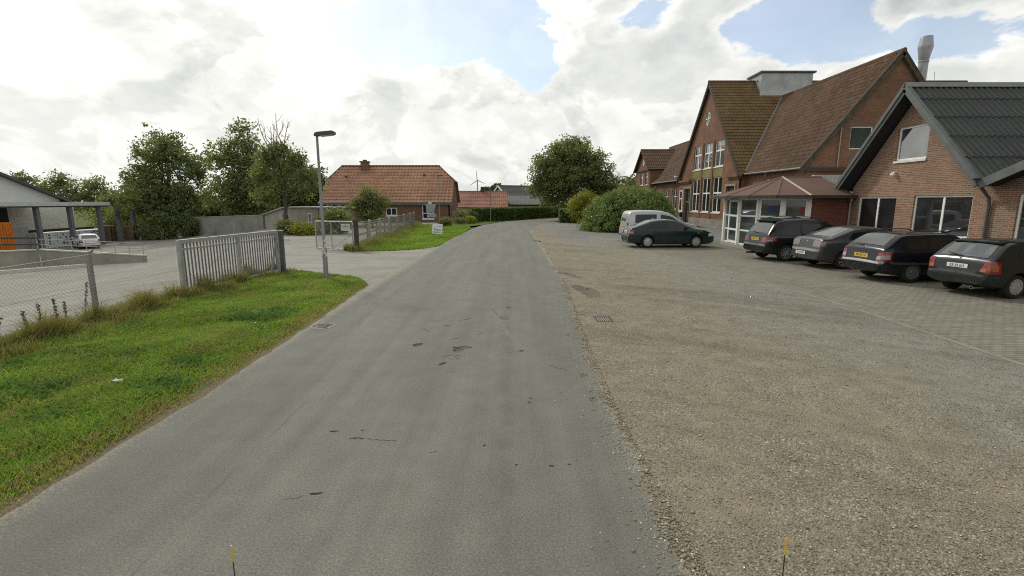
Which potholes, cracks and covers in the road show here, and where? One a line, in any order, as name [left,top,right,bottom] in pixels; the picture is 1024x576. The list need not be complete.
crack [493,310,531,350]
